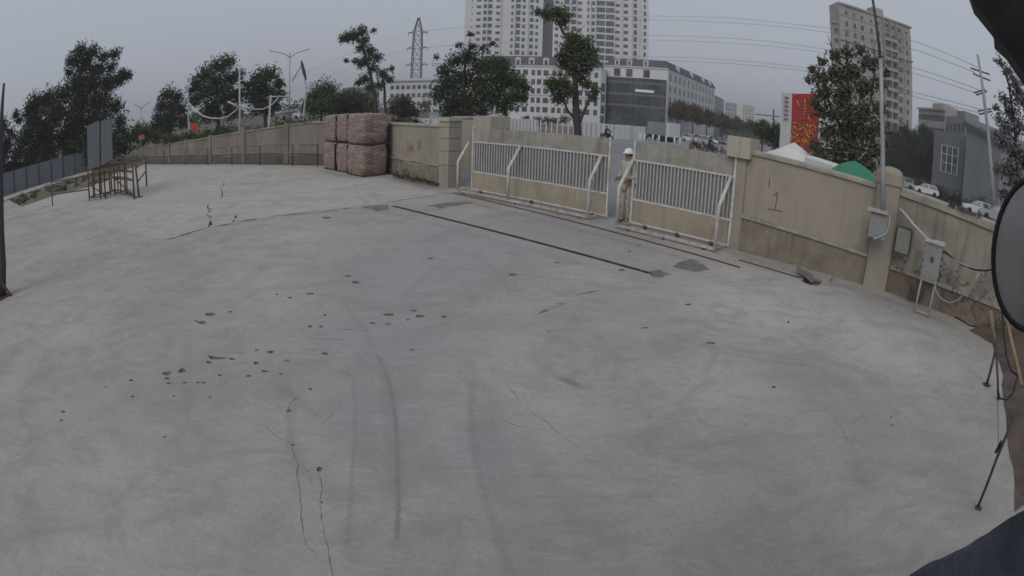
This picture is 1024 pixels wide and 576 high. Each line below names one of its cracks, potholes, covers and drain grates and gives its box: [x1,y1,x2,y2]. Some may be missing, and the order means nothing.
crack [257,424,333,576]
crack [507,386,588,452]
